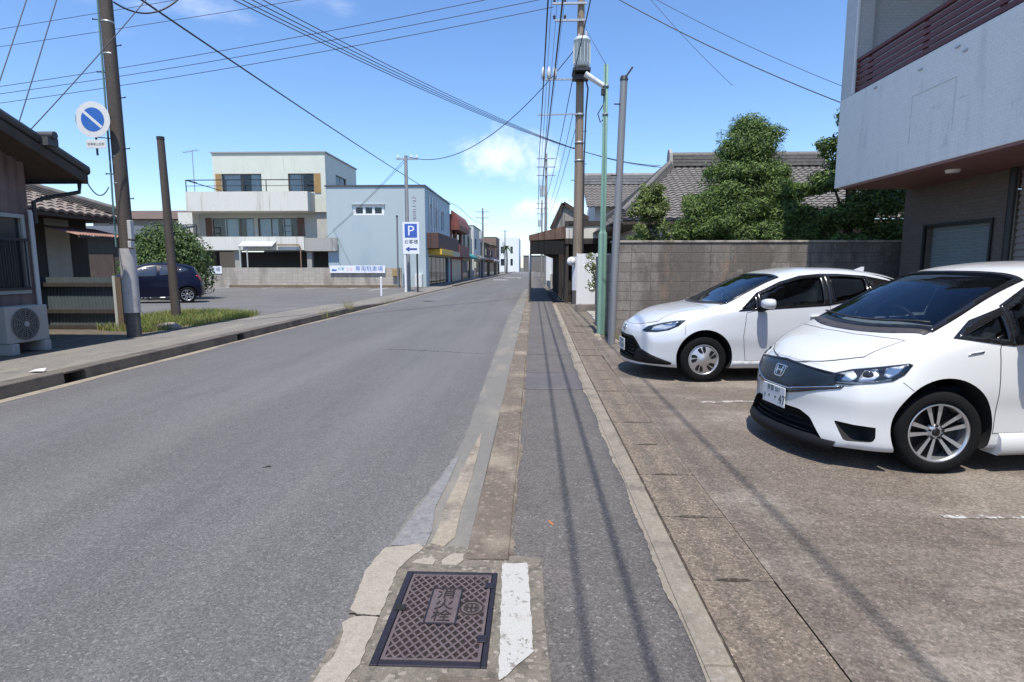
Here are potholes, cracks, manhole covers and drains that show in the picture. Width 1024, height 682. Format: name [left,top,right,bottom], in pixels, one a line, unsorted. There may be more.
manhole cover [369,571,498,669]
